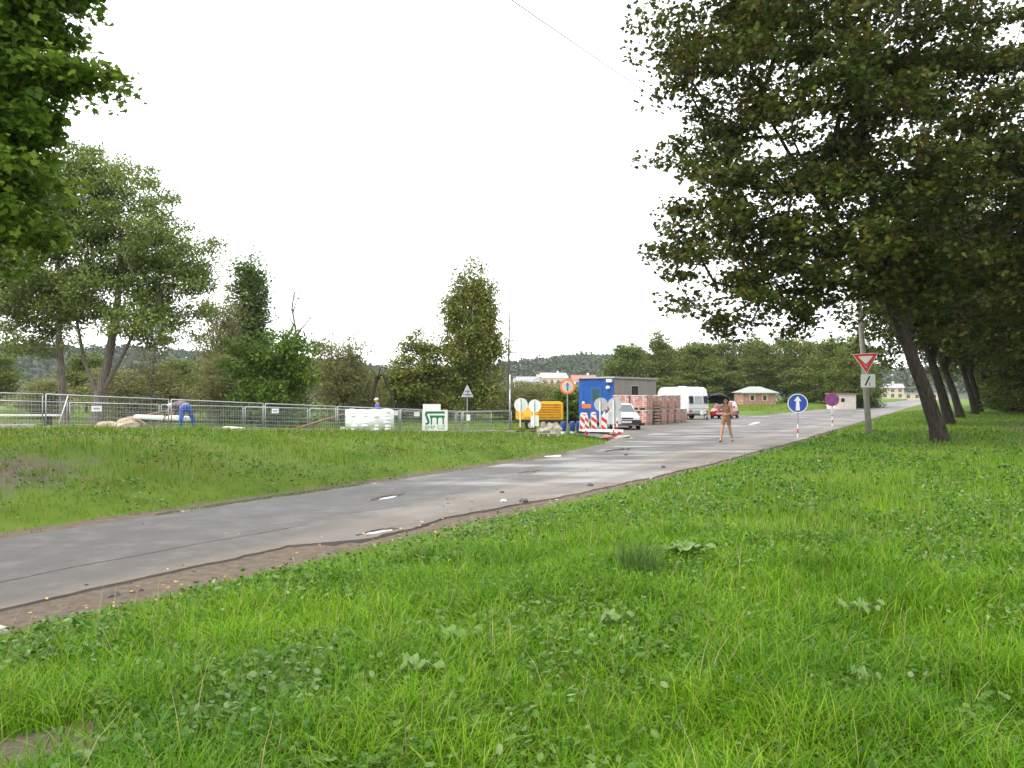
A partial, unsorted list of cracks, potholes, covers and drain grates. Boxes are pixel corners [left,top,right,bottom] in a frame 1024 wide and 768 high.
pothole [356,527,399,537]
